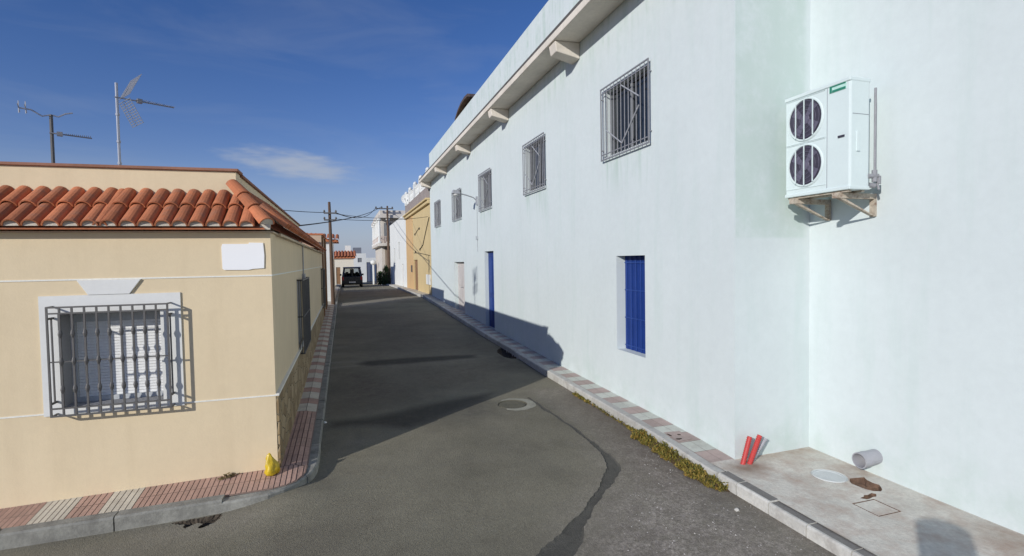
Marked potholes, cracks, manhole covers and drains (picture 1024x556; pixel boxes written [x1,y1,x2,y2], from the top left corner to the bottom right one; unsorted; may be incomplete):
manhole cover [811,469,848,483]
pothole [171,514,222,528]
utility cover [852,499,902,517]
manhole cover [498,398,536,411]
